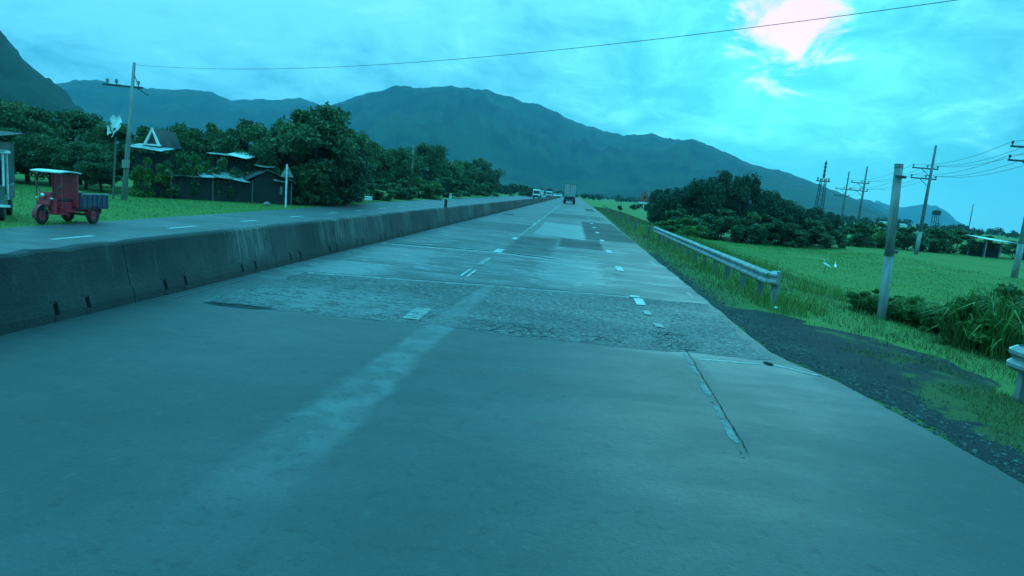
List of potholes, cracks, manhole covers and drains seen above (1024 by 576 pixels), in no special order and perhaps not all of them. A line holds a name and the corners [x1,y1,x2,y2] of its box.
crack [480,321,560,337]
pothole [204,301,274,309]
